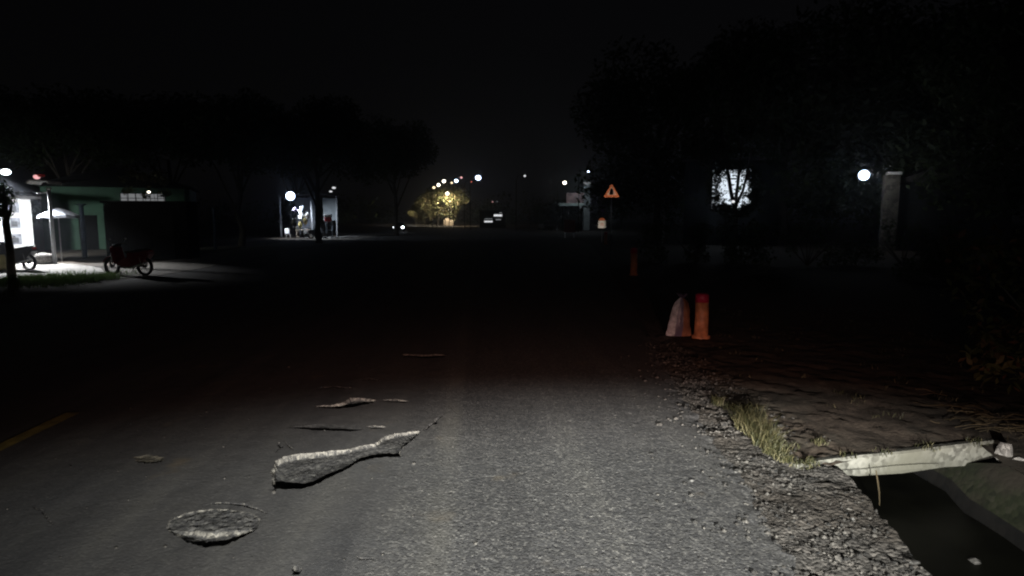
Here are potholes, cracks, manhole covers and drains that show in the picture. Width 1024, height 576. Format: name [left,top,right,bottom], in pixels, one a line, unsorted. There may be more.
pothole [166,509,261,548]
pothole [133,455,164,464]
pothole [270,431,421,489]
pothole [316,398,377,409]
